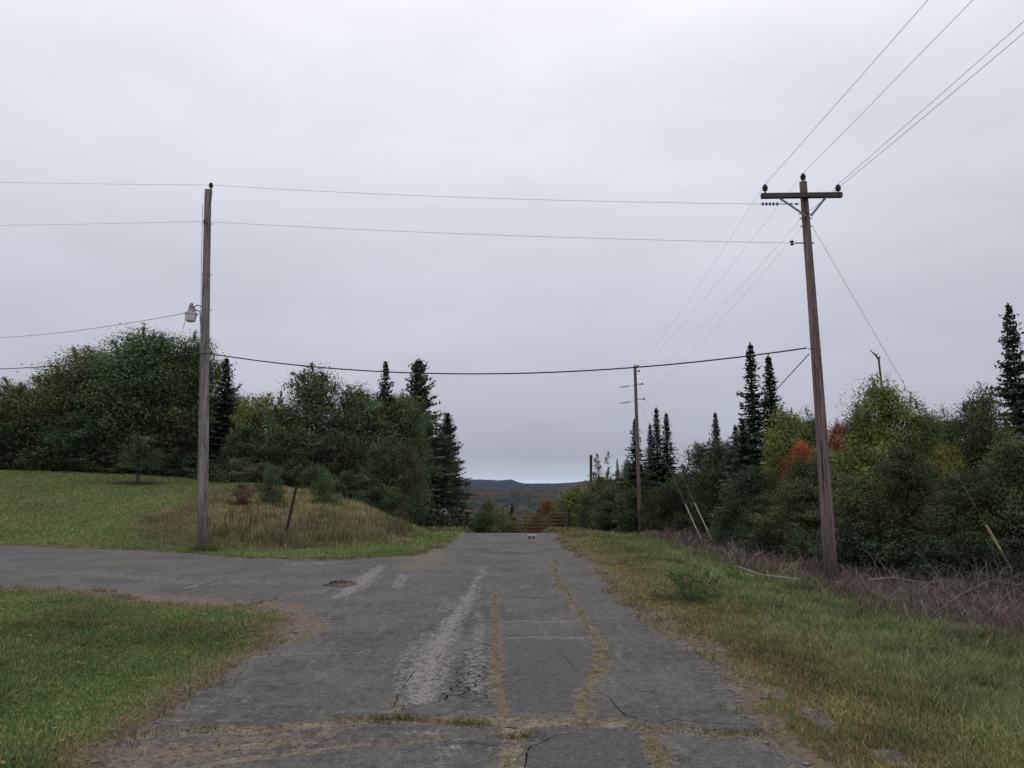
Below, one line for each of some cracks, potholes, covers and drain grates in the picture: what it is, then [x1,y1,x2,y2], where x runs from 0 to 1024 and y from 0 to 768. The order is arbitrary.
pothole [324,579,357,588]
crack [524,559,751,768]
crack [439,644,513,715]
